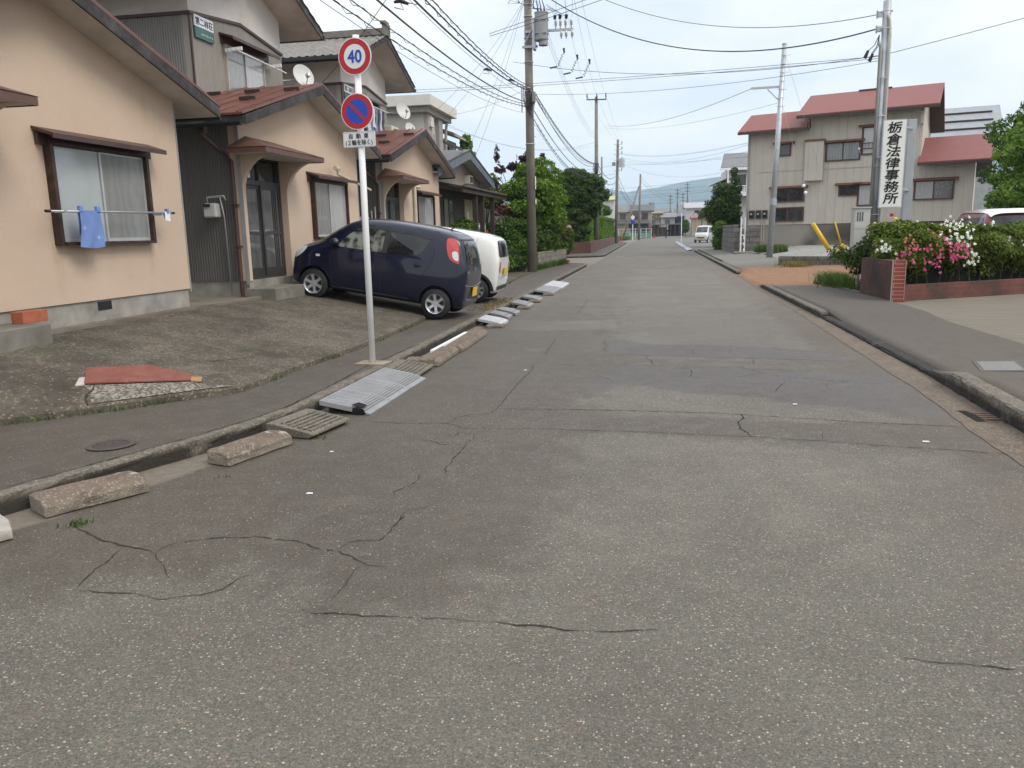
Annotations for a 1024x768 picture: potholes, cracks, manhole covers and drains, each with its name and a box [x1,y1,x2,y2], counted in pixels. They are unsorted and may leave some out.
crack [901,657,1020,670]
manhole cover [86,439,137,451]
crack [302,609,660,632]
crack [372,366,1005,472]
utility cover [972,360,1024,372]
crack [75,502,436,601]
drain grate [958,410,1003,422]
